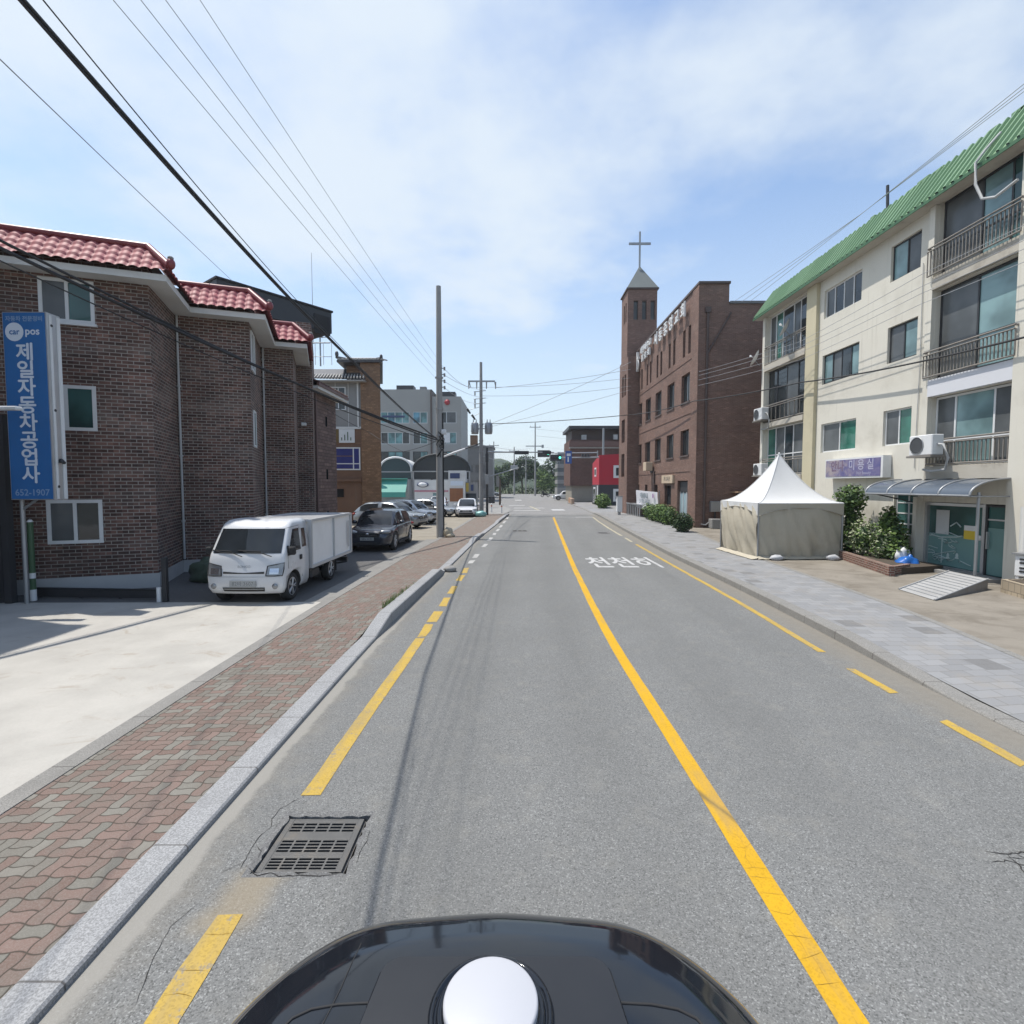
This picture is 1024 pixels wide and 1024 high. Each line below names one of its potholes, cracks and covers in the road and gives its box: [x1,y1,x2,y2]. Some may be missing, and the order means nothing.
crack [136,904,232,1003]
crack [988,851,1024,872]
crack [223,800,370,876]
drain grate [241,811,375,877]
